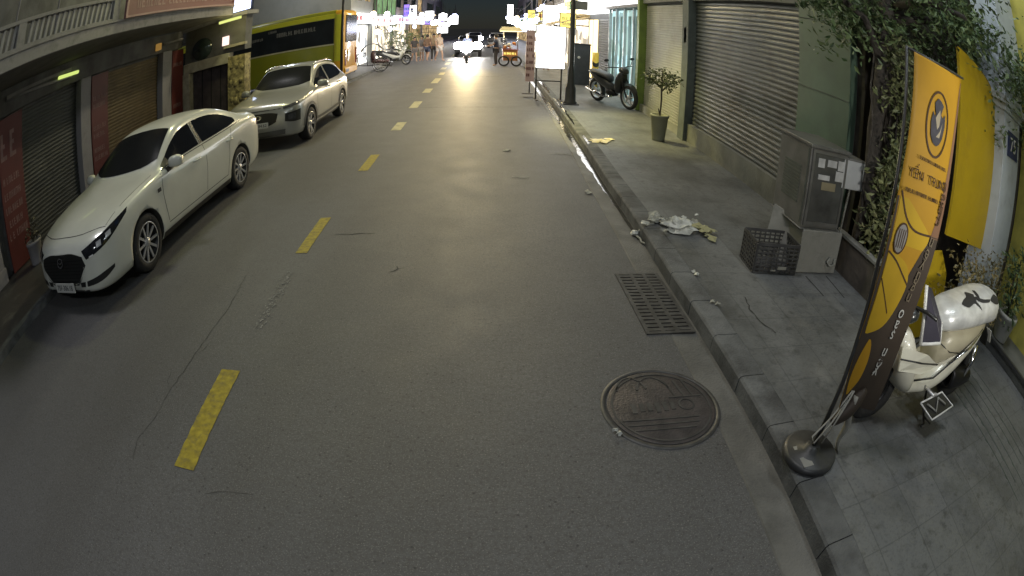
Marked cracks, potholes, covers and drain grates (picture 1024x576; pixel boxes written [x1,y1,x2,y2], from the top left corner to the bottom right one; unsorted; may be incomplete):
crack [133,276,246,457]
manhole cover [600,369,721,450]
drain grate [615,273,696,335]
